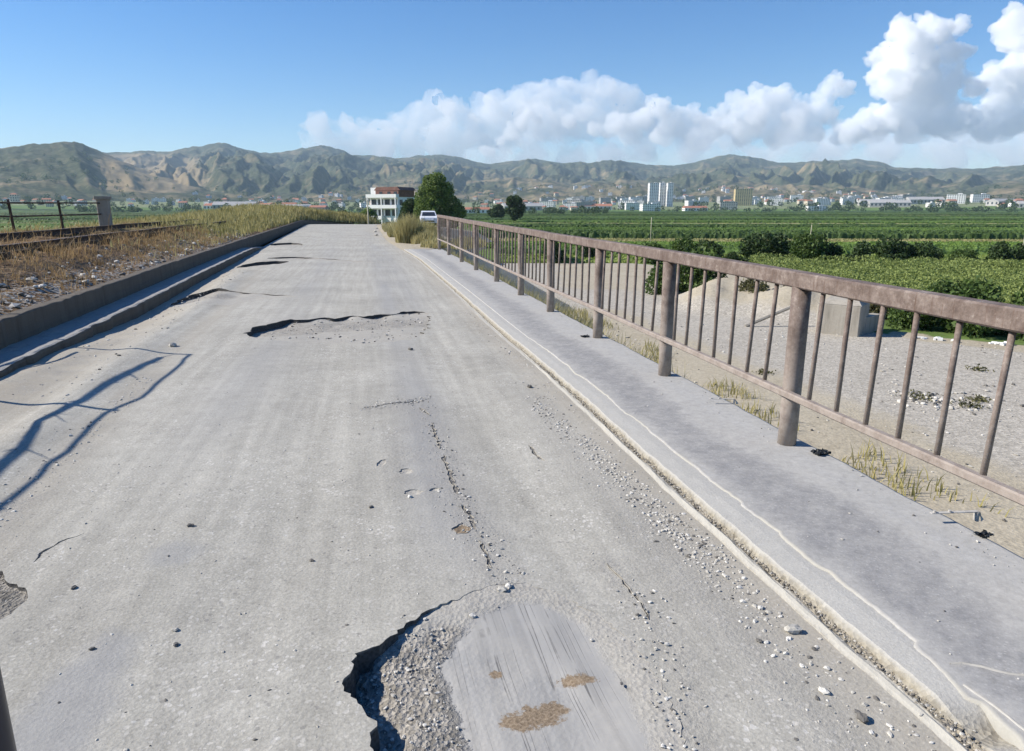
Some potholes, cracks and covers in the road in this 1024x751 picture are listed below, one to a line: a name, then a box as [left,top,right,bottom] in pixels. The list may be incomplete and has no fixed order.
pothole [169,288,296,307]
pothole [342,582,686,751]
crack [34,533,84,562]
crack [606,563,649,619]
pothole [245,311,431,344]
pothole [0,571,28,619]
crack [378,401,492,568]
